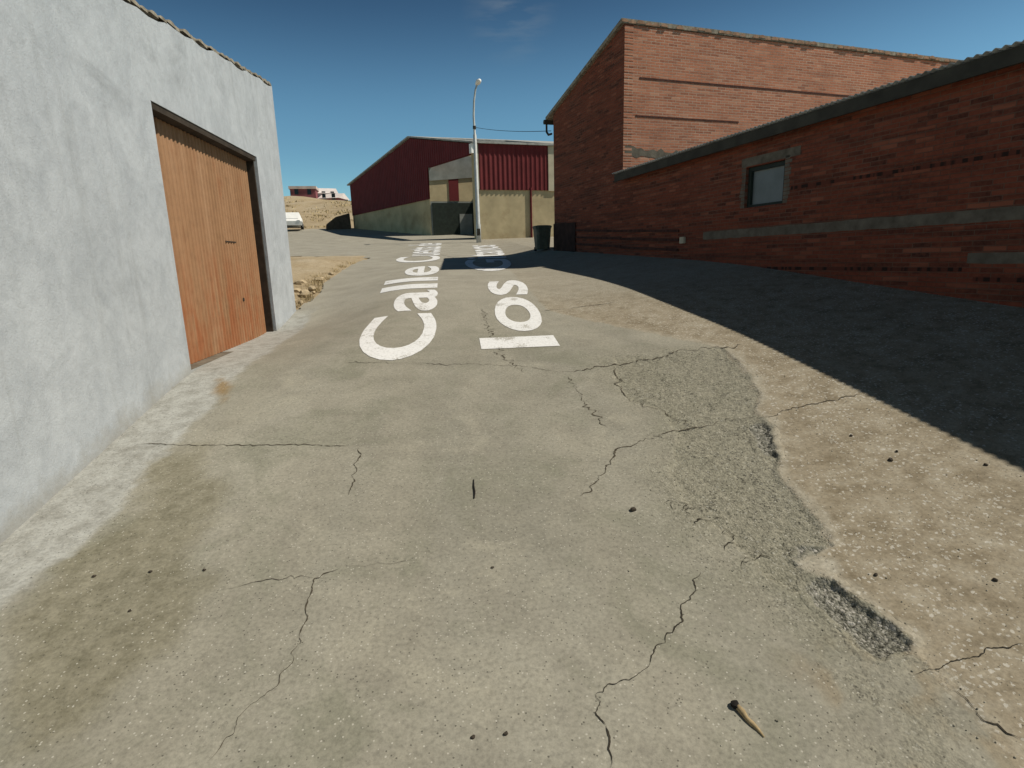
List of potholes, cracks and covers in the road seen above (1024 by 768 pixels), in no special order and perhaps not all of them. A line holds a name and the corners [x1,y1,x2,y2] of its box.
crack [349,309,857,494]
crack [595,573,701,766]
crack [917,643,1022,738]
crack [214,560,406,754]
pothole [791,569,925,667]
